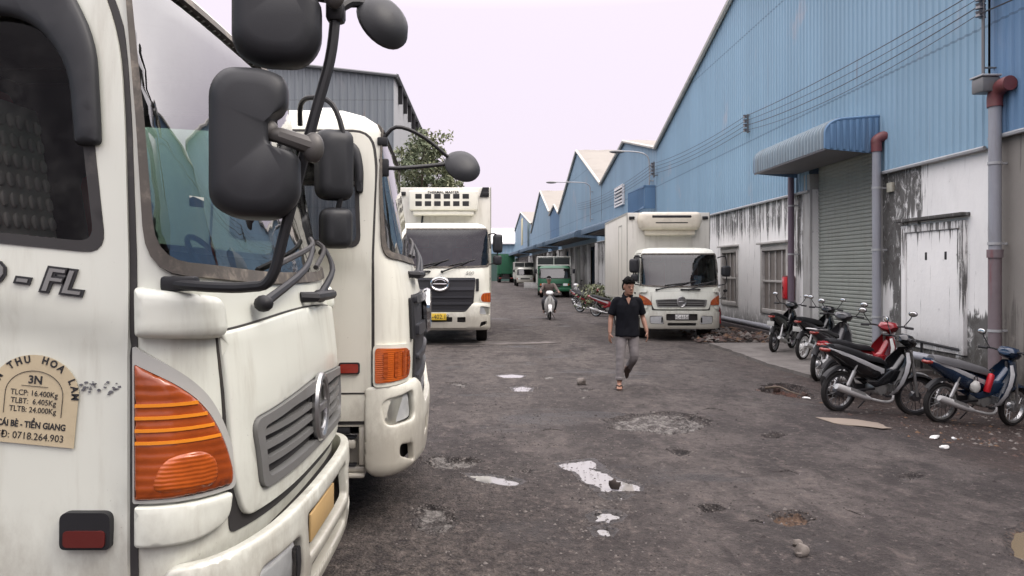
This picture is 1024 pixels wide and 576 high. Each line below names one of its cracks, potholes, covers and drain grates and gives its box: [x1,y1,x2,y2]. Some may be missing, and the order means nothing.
pothole [756,431,789,439]
pothole [761,507,824,527]
pothole [422,454,484,470]
pothole [399,503,467,536]
pothole [663,447,697,458]
pothole [753,382,821,399]
pothole [692,503,735,513]
pothole [598,410,718,436]
